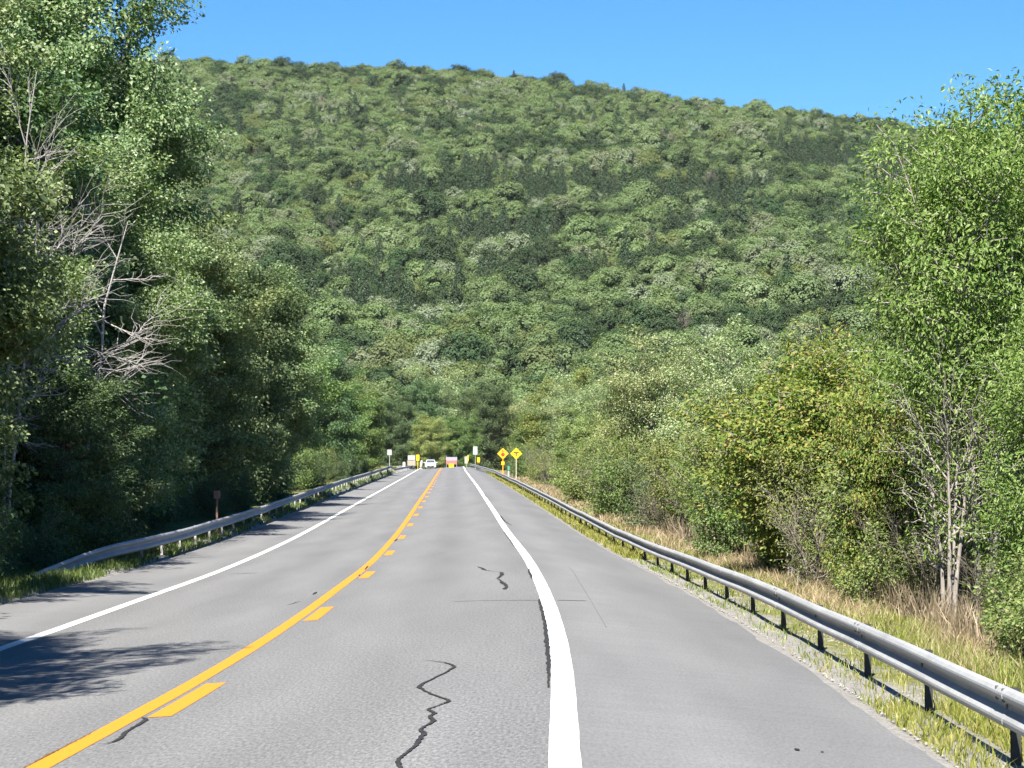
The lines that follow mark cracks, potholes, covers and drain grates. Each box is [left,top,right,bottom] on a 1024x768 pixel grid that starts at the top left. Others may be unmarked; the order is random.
crack [538,599,551,687]
crack [477,566,508,589]
